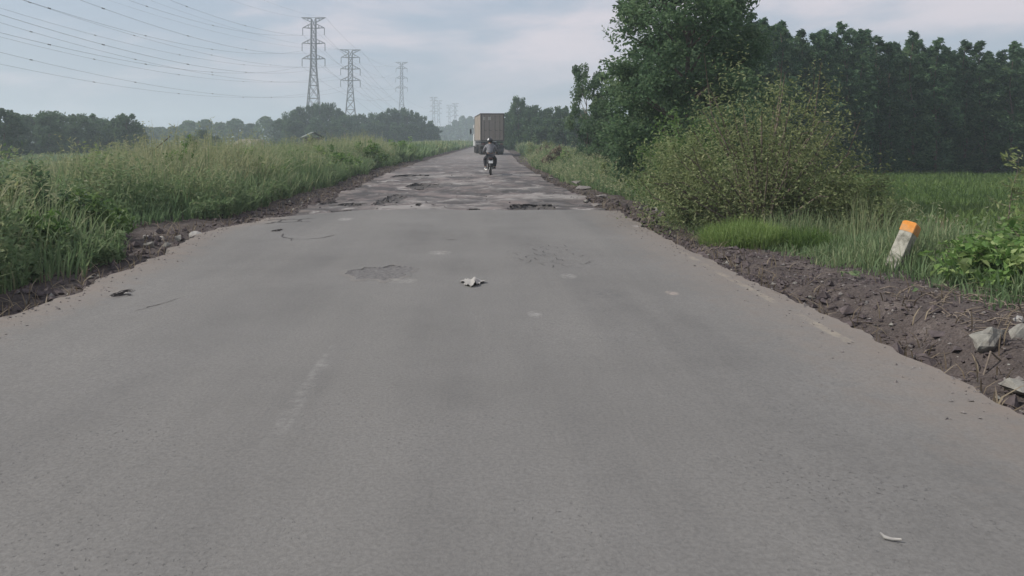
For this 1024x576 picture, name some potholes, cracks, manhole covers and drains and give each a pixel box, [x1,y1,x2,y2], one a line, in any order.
pothole [337,264,419,283]
pothole [367,193,411,207]
pothole [401,182,443,191]
